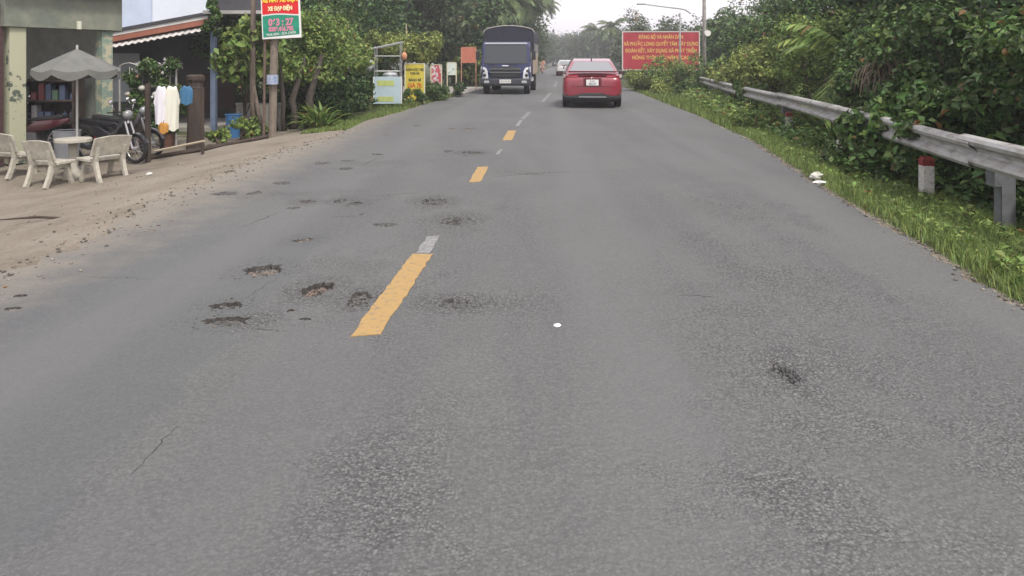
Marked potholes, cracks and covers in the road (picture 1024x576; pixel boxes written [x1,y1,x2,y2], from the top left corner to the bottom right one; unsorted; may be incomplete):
pothole [243,264,283,276]
pothole [208,302,243,310]
pothole [346,291,374,307]
pothole [201,316,251,326]
pothole [299,282,335,298]
